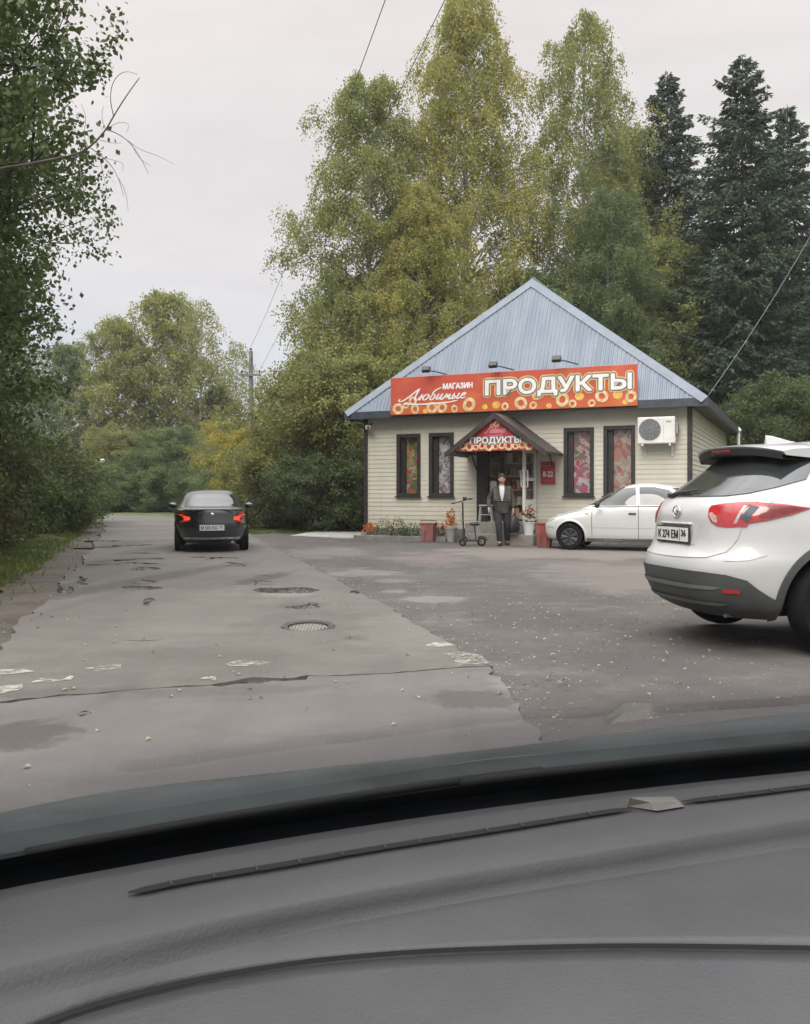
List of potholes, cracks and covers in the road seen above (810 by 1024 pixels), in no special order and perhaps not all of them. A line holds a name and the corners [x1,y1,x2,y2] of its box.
pothole [286,602,320,610]
manhole cover [279,620,337,631]
